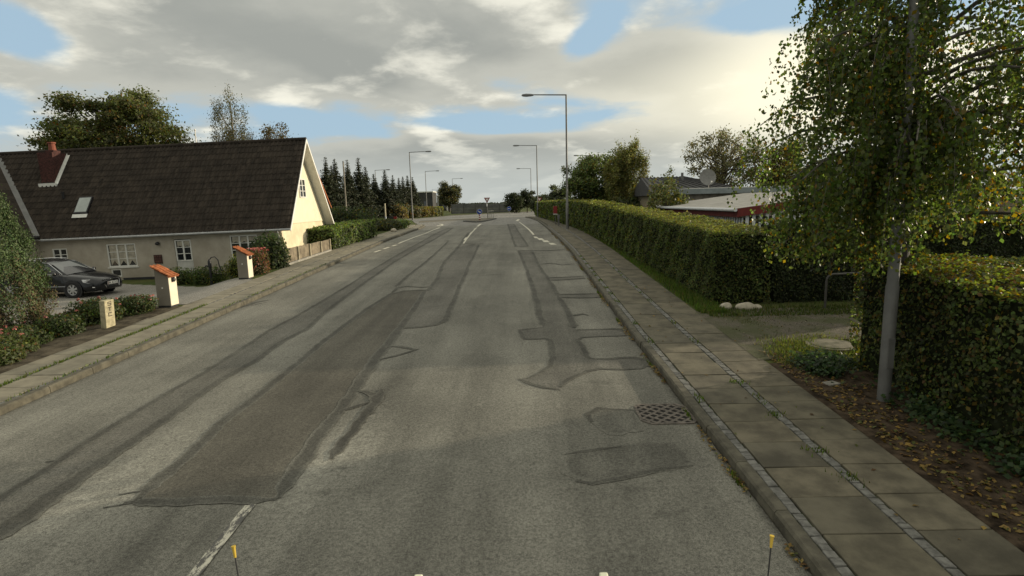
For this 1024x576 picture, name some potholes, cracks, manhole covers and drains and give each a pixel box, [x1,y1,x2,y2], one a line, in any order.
drain grate [634,403,697,425]
